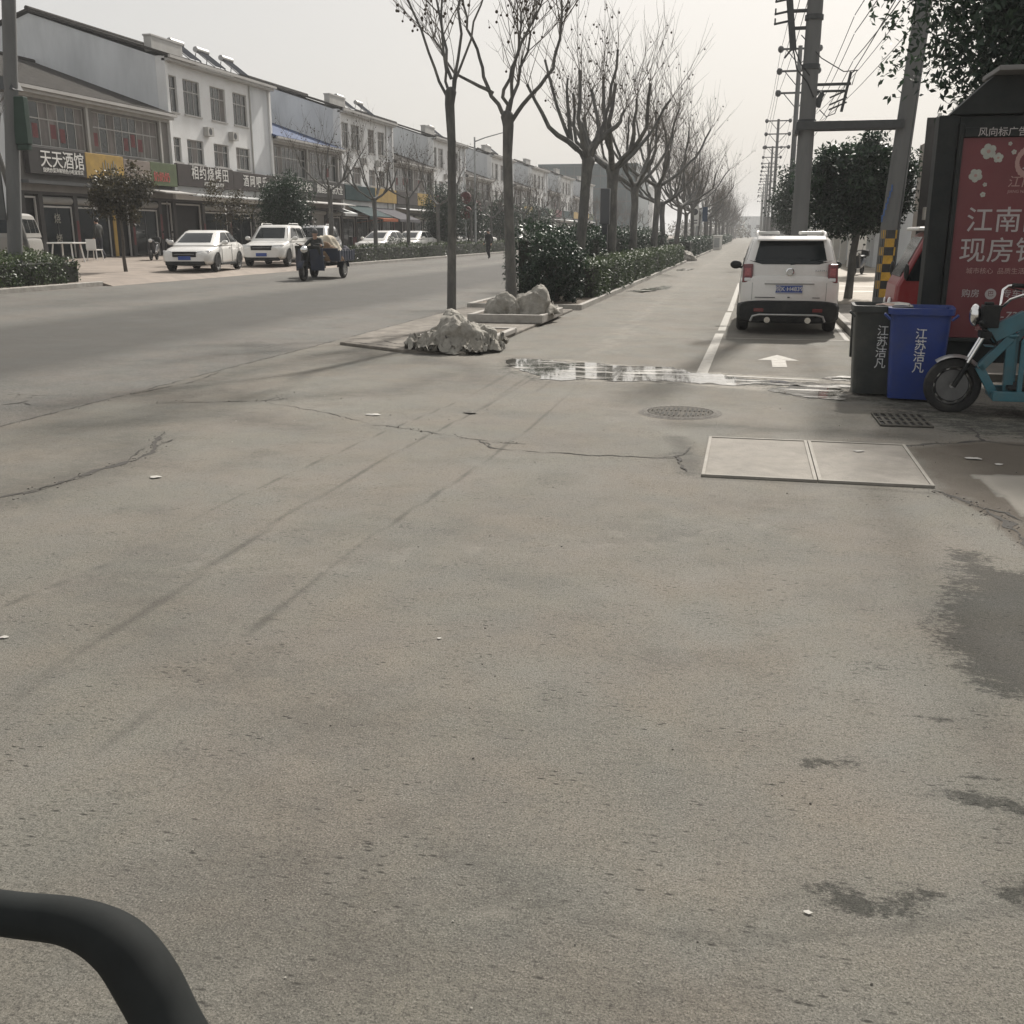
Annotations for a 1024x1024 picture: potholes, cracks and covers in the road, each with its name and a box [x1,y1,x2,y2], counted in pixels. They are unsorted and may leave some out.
manhole cover [639,406,722,420]
crack [927,490,1024,545]
crack [362,424,690,471]
crack [0,432,177,500]
manhole cover [701,436,817,482]
crack [157,393,355,420]
drain grate [871,412,934,428]
manhole cover [807,440,935,488]
